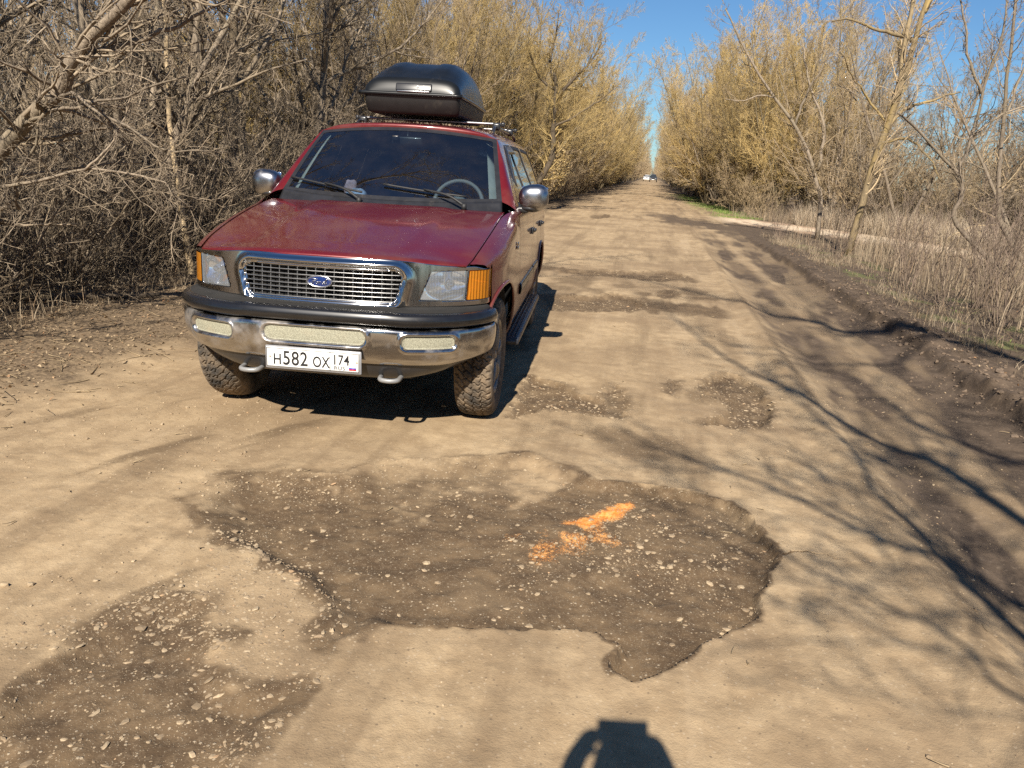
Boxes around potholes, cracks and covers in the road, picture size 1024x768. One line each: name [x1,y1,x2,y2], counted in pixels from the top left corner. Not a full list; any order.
pothole [696,372,776,429]
pothole [654,289,683,299]
pothole [192,452,781,682]
pothole [538,292,649,313]
pothole [0,593,320,768]
pothole [502,374,633,419]
